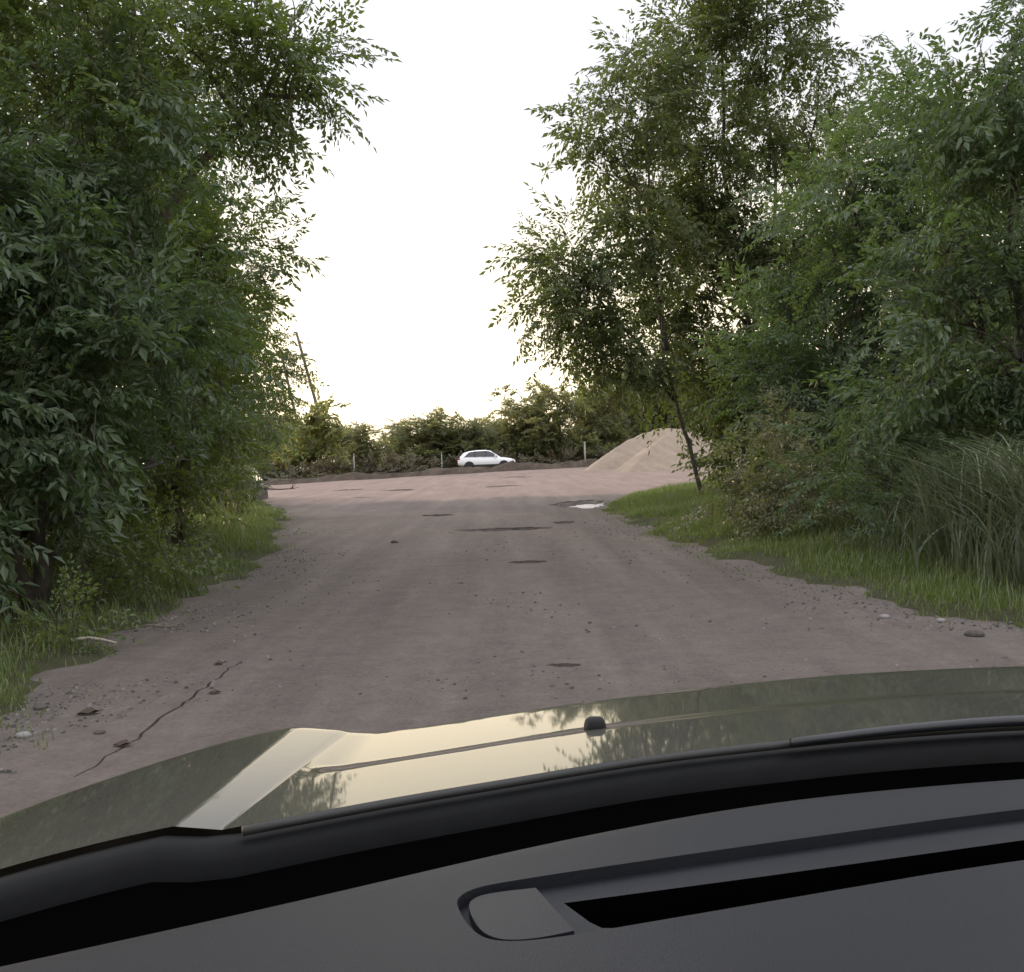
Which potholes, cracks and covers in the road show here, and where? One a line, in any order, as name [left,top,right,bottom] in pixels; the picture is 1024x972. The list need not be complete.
crack [74,661,241,777]
